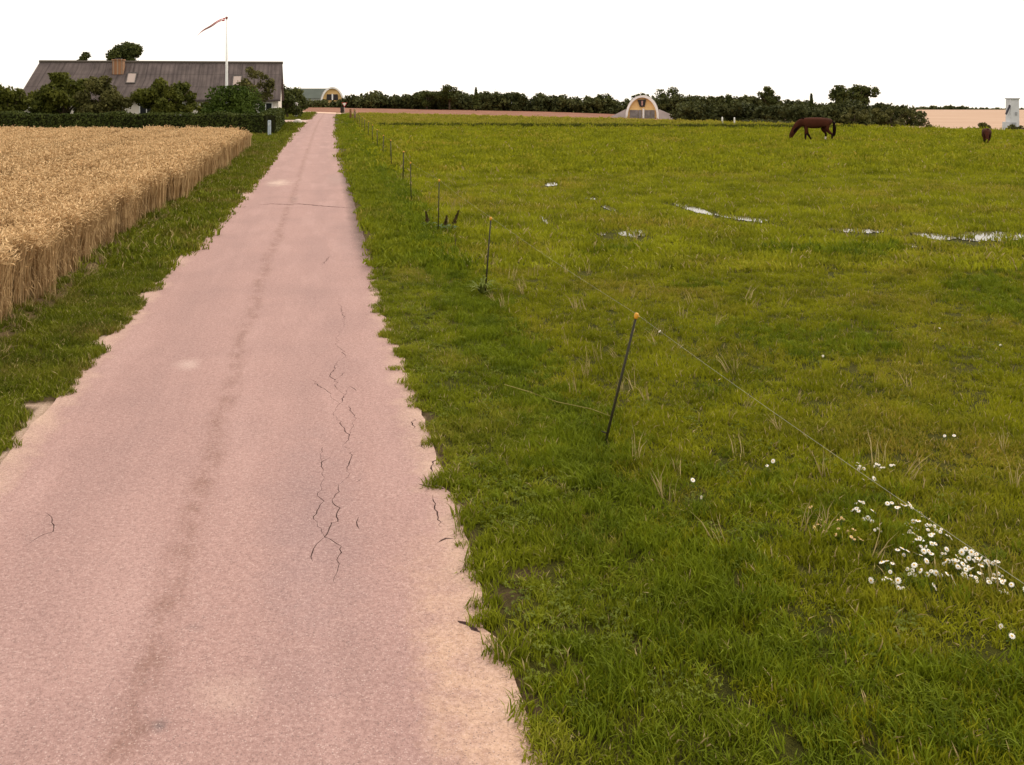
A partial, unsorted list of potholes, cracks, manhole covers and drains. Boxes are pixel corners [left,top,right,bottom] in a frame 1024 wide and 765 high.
crack [411,420,453,542]
crack [310,308,359,581]
